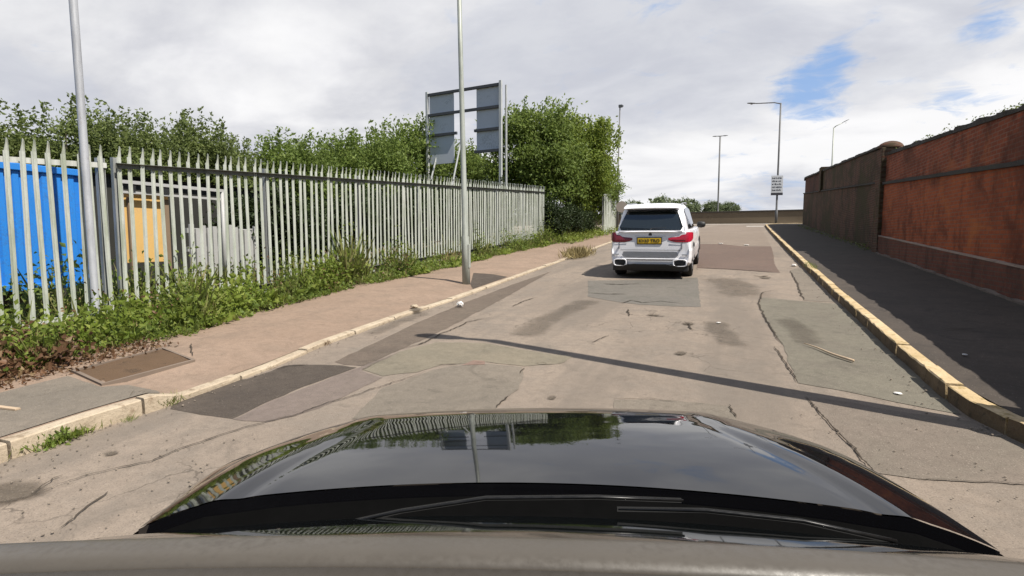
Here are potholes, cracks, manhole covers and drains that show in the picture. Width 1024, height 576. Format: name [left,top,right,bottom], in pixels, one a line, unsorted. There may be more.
crack [32,474,108,527]
utility cover [71,347,195,386]
crack [754,271,805,381]
crack [807,398,873,469]
